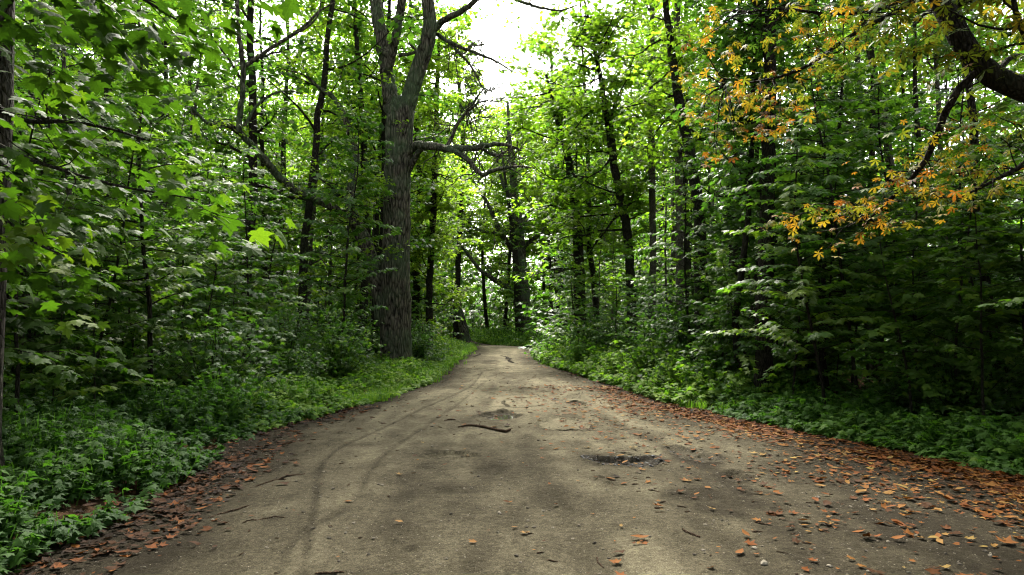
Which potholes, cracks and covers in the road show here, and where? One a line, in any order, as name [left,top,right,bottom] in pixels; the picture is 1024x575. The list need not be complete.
pothole [580,455,665,467]
pothole [422,450,480,458]
pothole [475,408,524,420]
